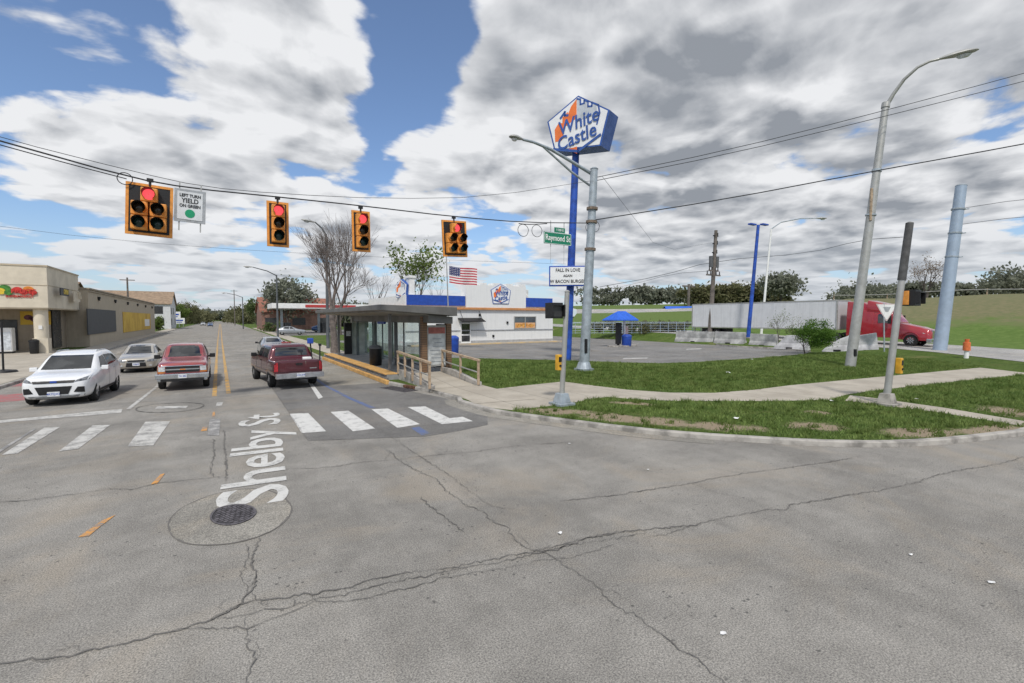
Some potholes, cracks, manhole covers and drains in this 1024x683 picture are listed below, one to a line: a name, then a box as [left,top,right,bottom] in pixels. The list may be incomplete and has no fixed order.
crack [0,429,1021,683]
